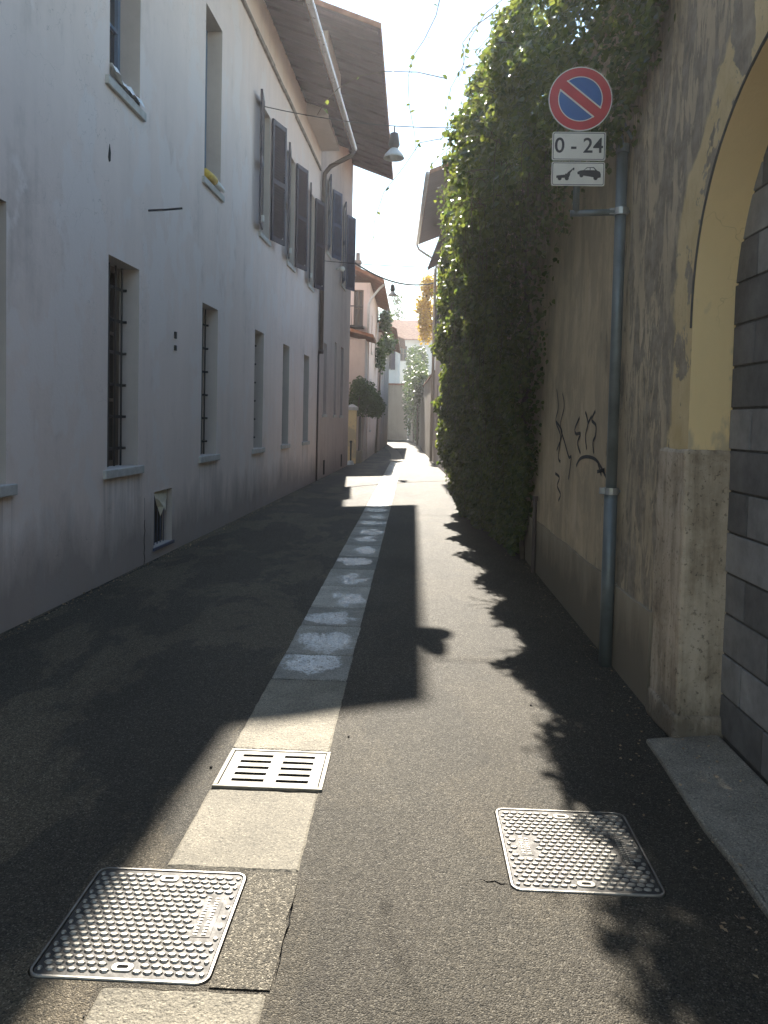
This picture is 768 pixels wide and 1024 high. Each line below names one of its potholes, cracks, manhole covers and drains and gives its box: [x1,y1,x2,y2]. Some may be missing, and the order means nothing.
manhole cover [495,808,665,898]
manhole cover [30,867,246,988]
drain grate [212,748,331,794]
